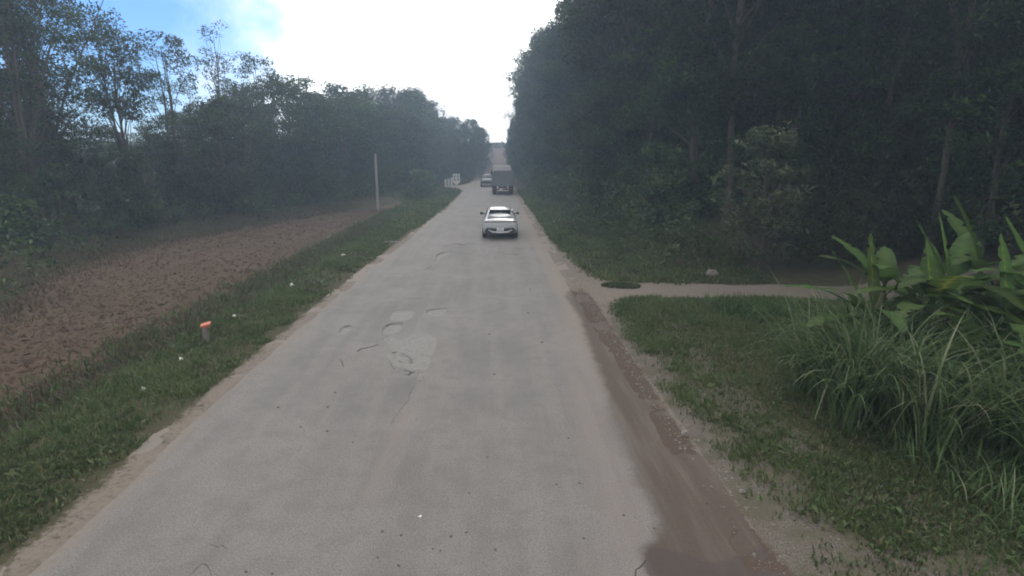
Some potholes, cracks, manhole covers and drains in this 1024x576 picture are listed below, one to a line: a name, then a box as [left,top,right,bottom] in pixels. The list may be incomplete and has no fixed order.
pothole [382,322,404,335]
pothole [426,308,448,317]
